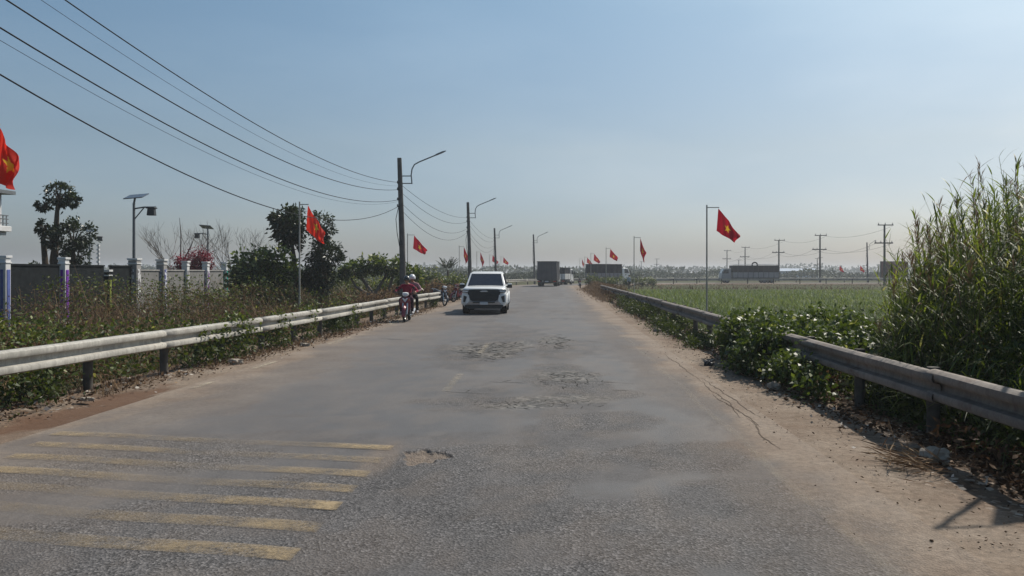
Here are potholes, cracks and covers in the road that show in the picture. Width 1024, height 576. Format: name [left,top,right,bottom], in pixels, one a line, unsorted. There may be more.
crack [666,355,779,448]
pothole [386,447,462,466]
